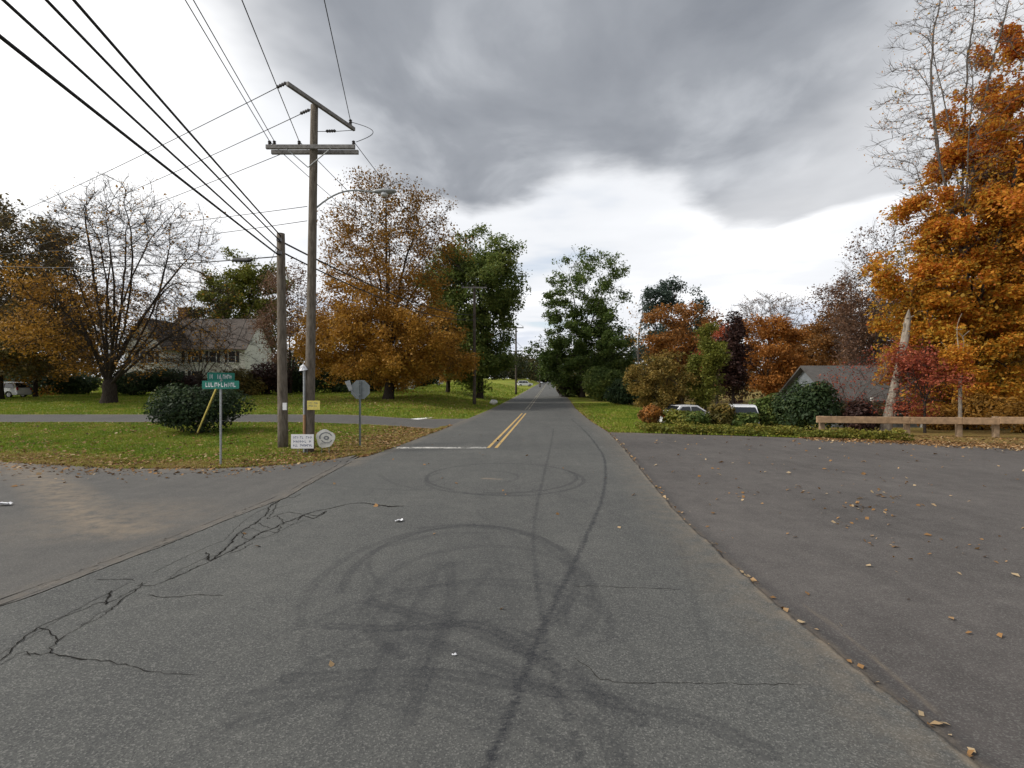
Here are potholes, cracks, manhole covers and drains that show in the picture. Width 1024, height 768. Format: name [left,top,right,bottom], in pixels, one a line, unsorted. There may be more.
crack [575,658,800,685]
crack [152,494,399,579]
crack [0,557,223,675]
